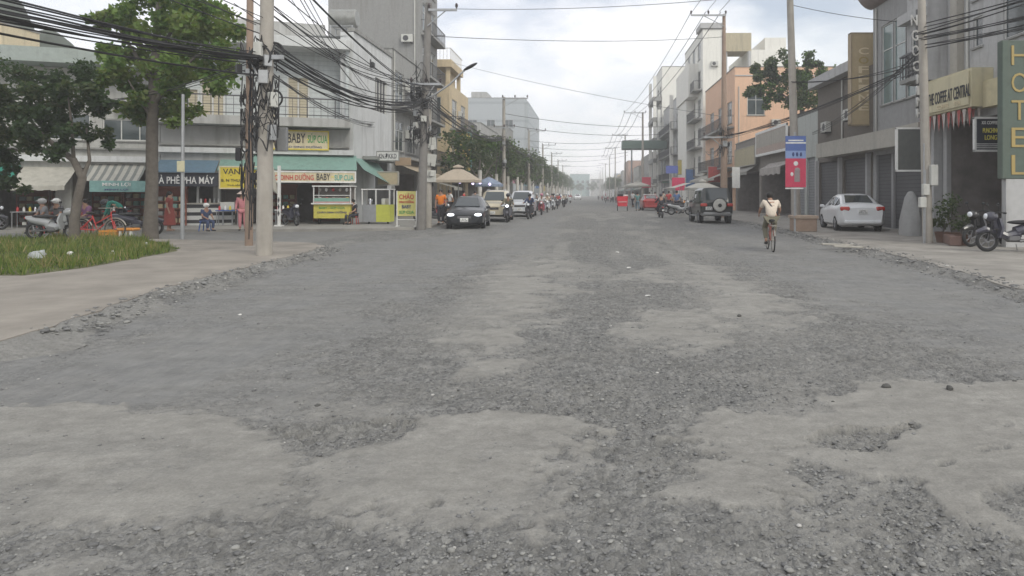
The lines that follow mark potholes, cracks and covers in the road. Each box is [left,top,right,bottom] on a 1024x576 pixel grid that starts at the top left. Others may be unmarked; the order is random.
pothole [804,420,924,452]
pothole [280,416,419,451]
